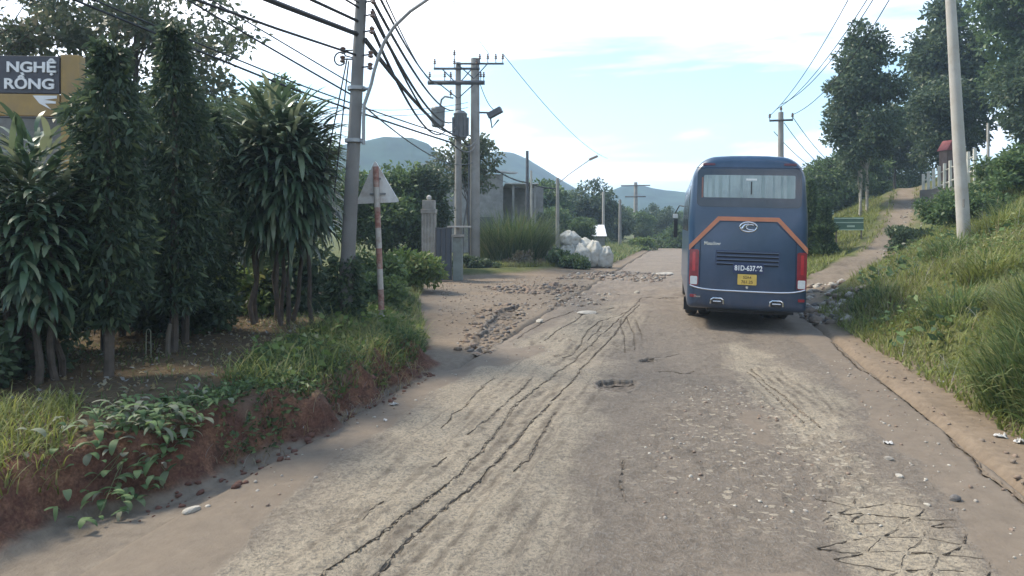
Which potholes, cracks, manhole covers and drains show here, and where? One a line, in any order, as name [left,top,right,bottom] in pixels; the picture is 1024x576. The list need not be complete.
crack [320,297,694,576]
crack [816,499,990,576]
pothole [592,378,645,393]
pothole [469,306,524,357]
